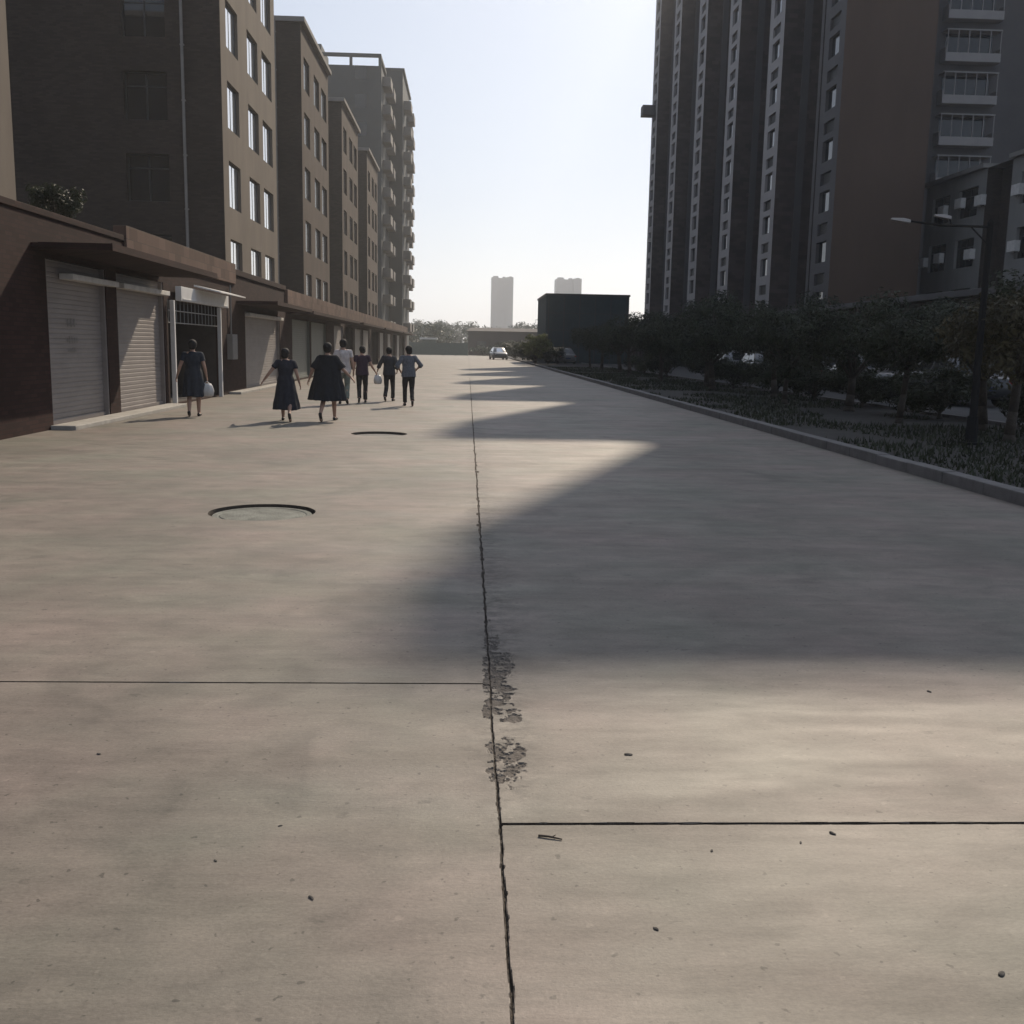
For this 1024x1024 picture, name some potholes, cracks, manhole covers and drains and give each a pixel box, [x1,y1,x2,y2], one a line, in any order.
manhole cover [212,507,312,521]
